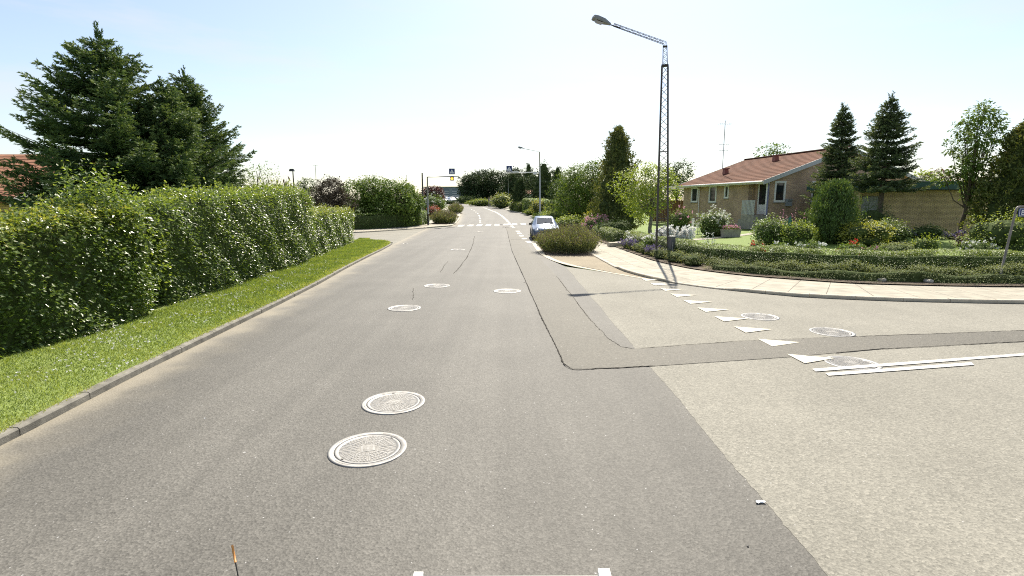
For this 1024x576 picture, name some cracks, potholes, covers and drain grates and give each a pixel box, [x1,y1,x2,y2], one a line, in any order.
manhole cover [741,313,780,321]
manhole cover [361,391,425,415]
manhole cover [327,432,407,468]
manhole cover [809,327,856,337]
manhole cover [824,356,883,370]
